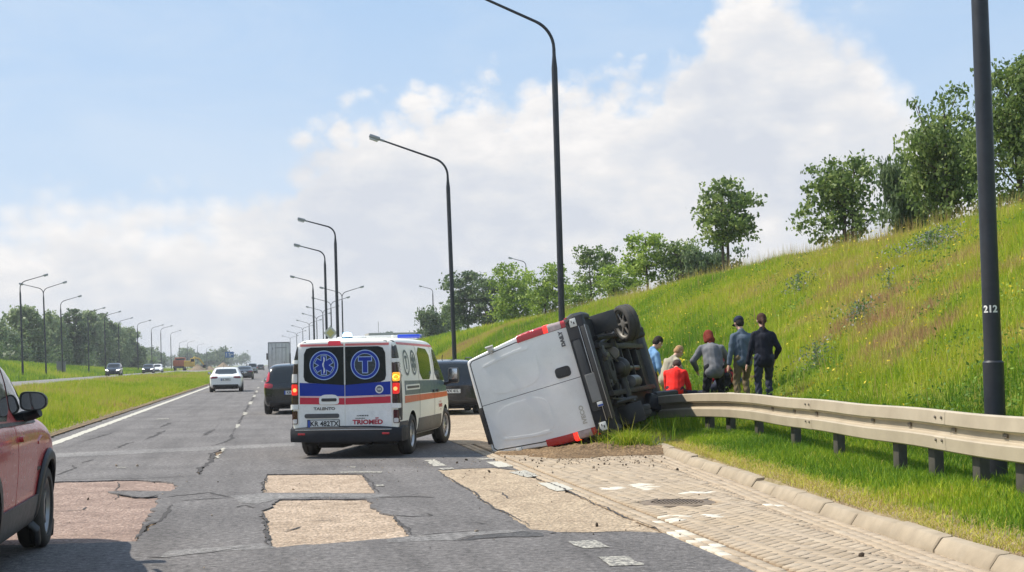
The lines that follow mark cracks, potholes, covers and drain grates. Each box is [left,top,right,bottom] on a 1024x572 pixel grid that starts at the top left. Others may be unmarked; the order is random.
manhole cover [640,499,715,508]
crack [57,459,315,558]
